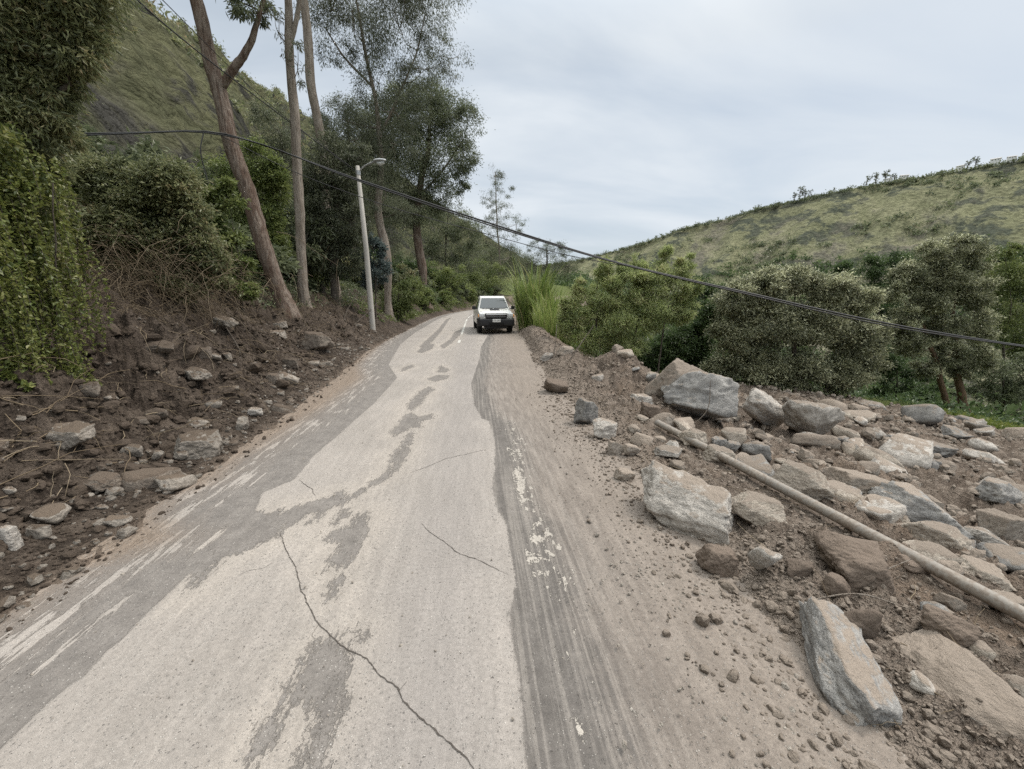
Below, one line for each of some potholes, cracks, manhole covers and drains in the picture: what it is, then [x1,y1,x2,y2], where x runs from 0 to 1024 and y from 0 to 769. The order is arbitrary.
crack [280,533,474,769]
